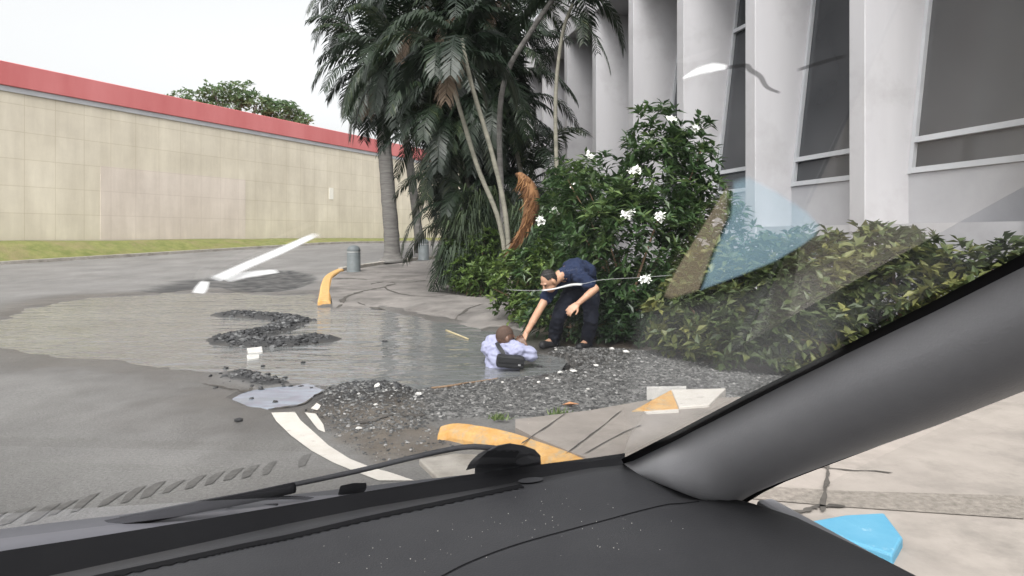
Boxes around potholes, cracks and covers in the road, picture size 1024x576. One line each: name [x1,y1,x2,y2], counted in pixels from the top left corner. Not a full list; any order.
crack [334,278,481,319]
crack [794,465,845,513]
pothole [0,290,566,390]
